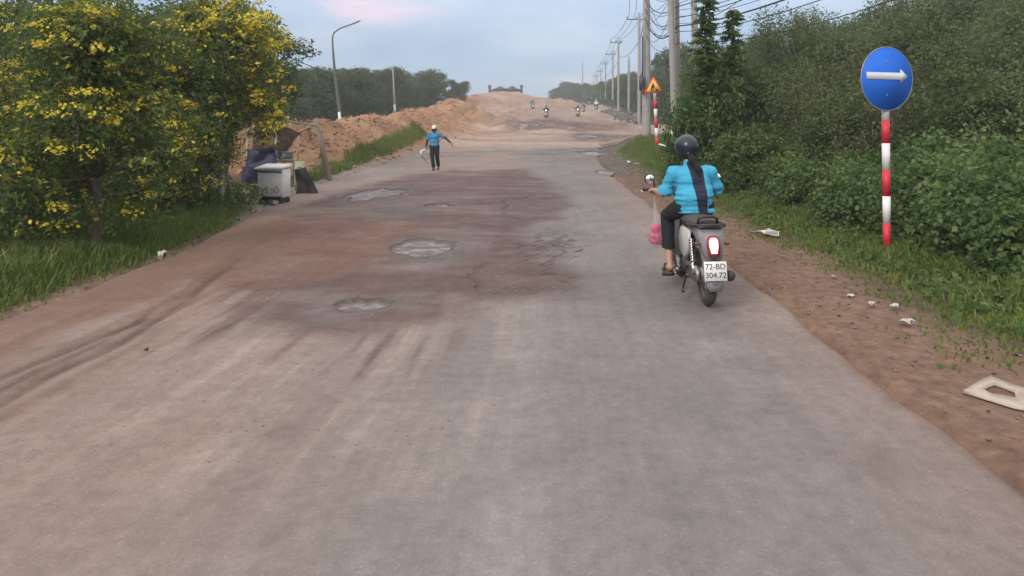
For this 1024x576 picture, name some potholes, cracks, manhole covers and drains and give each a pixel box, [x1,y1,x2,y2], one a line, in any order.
pothole [342,187,410,202]
pothole [387,237,460,259]
pothole [329,297,397,312]
crack [513,228,587,282]
